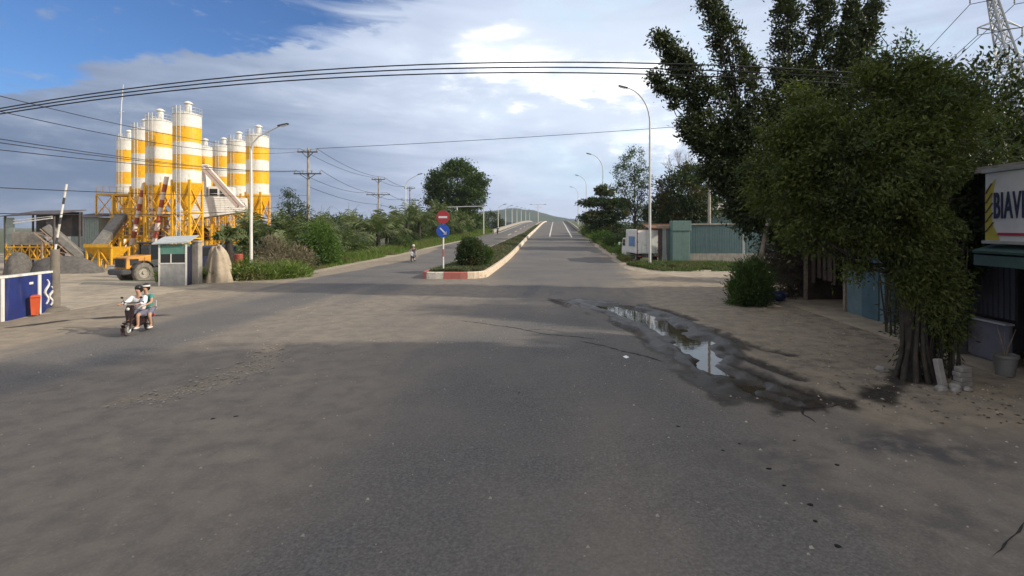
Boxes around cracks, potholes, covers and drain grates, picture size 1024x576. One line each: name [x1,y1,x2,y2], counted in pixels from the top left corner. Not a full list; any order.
crack [458,320,660,361]
crack [995,523,1024,554]
pothole [583,301,806,407]
